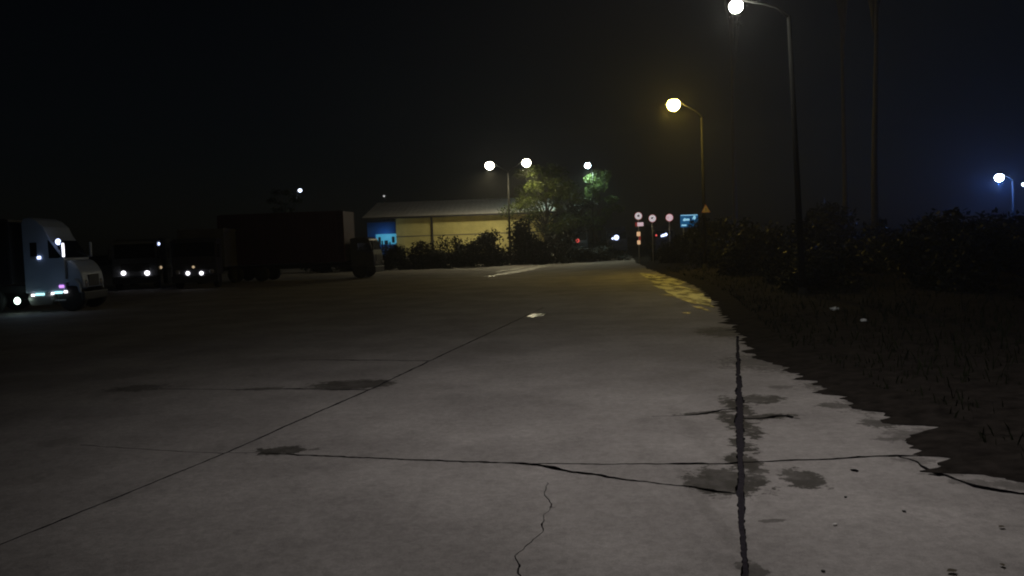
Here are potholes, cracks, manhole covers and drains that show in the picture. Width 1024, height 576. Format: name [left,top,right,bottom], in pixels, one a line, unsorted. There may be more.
crack [652,409,800,419]
crack [229,452,1024,576]
